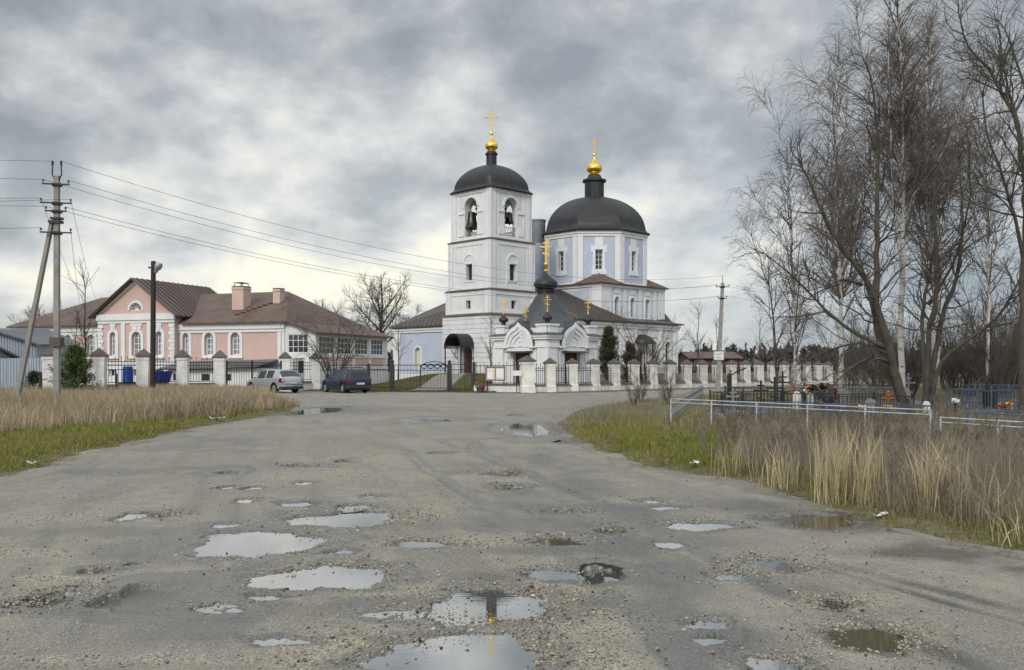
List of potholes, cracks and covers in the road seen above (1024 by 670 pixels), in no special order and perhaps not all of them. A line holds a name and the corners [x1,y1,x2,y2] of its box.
pothole [547,556,652,593]
pothole [148,523,369,567]
pothole [242,502,448,534]
pothole [775,588,890,617]
pothole [96,509,169,524]
pothole [356,532,492,556]
pothole [482,420,571,442]
pothole [340,565,632,655]
pothole [225,589,687,670]
pothole [736,508,881,535]
pothole [495,531,615,552]
pothole [482,481,551,494]
